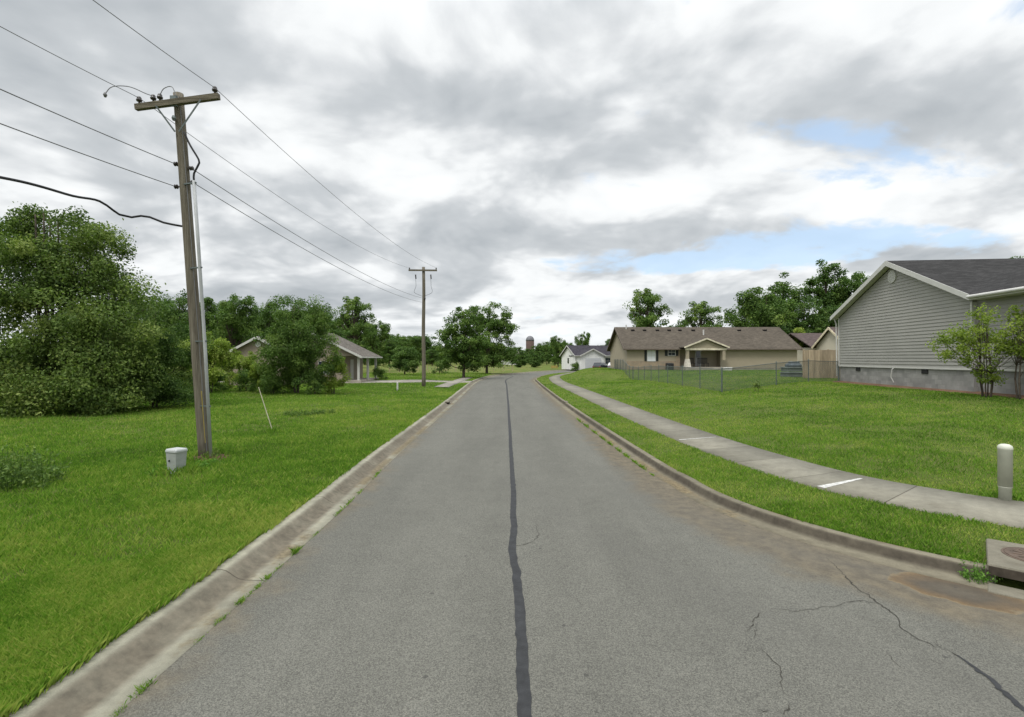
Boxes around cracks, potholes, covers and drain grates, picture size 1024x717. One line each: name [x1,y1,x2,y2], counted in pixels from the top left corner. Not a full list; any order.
manhole cover [1001,547,1024,562]
drain grate [986,539,1024,600]
crack [748,558,1024,715]
